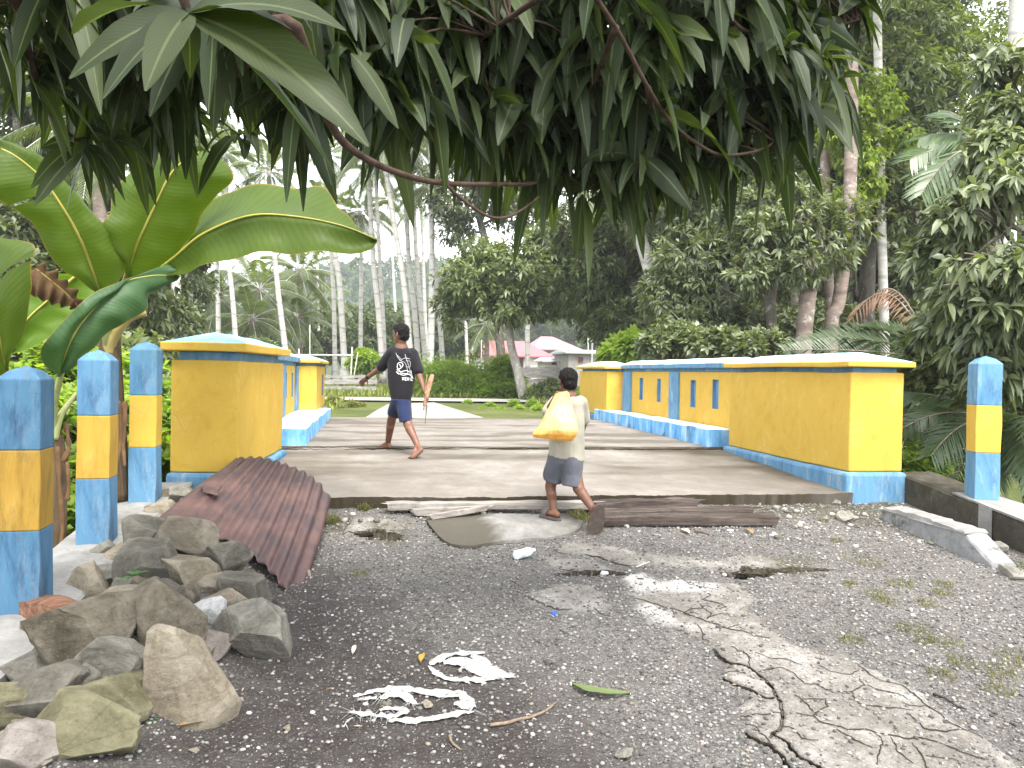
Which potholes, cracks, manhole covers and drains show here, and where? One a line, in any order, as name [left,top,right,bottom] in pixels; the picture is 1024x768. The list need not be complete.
pothole [733,567,831,578]
crack [636,578,986,768]
pothole [353,528,404,541]
pothole [720,565,788,580]
